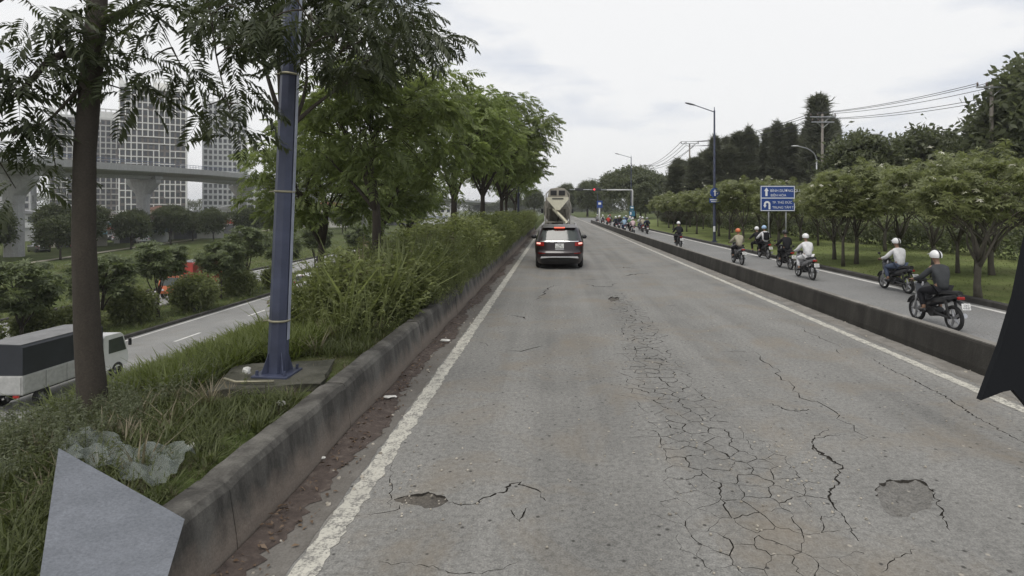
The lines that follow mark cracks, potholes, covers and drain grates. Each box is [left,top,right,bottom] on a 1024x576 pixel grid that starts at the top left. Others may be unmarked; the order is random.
pothole [394,492,448,508]
crack [871,358,1023,442]
pothole [875,479,934,518]
crack [608,292,862,576]
crack [448,482,546,522]
